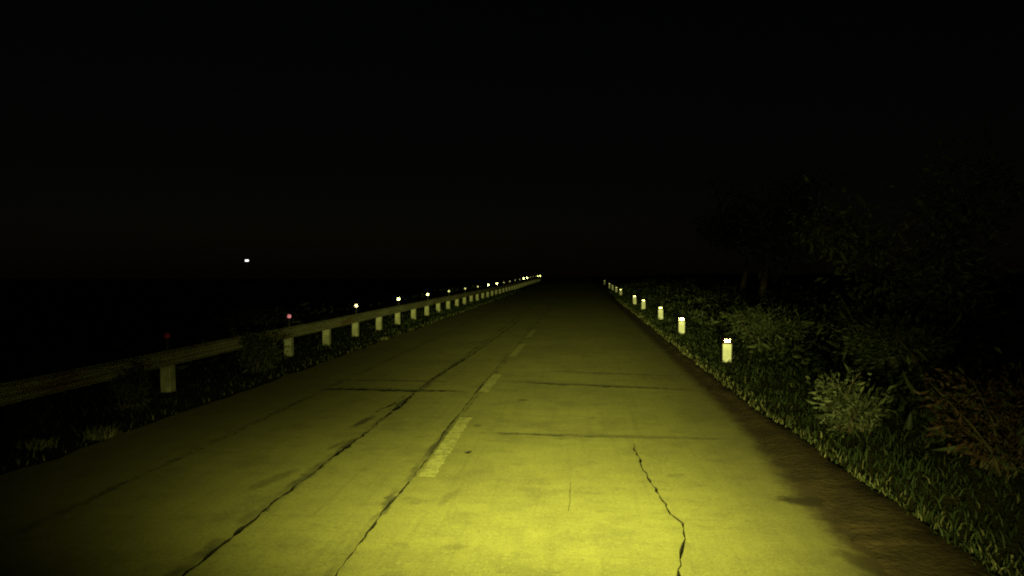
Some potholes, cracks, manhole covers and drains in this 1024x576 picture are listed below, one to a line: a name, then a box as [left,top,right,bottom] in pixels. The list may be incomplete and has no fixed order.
crack [54,321,706,576]
